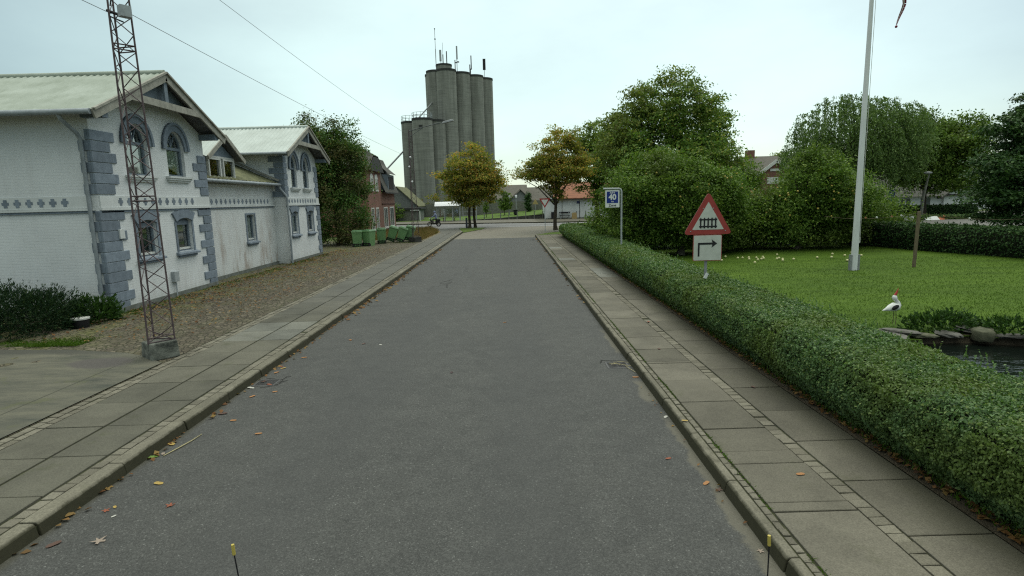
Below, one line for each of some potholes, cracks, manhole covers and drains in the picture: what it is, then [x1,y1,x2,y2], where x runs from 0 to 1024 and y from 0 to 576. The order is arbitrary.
crack [260,376,291,388]
